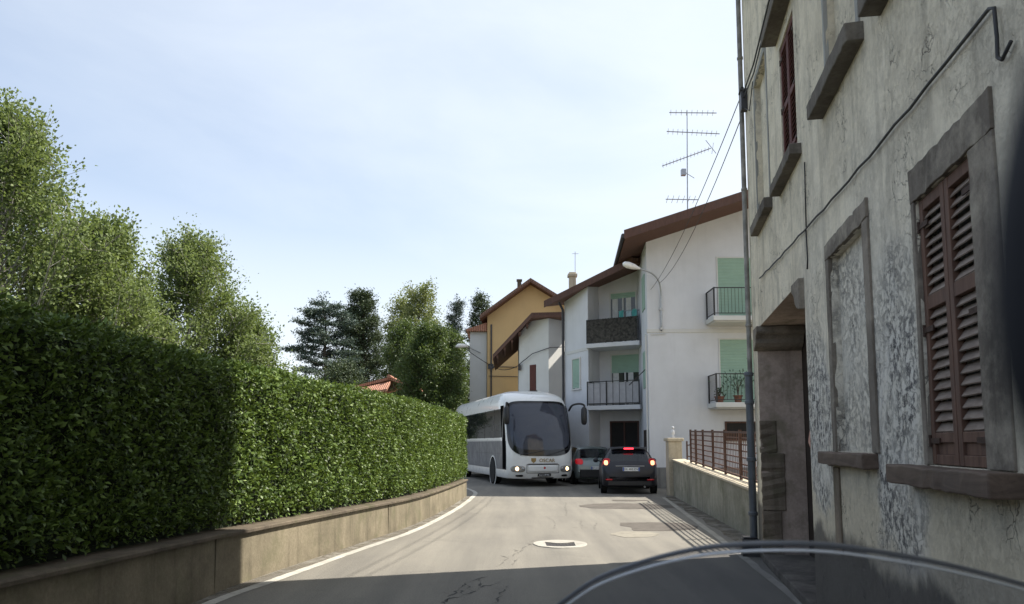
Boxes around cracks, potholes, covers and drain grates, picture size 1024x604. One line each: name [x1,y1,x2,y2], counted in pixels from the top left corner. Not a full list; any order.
manhole cover [533,540,587,548]
crack [442,540,534,603]
